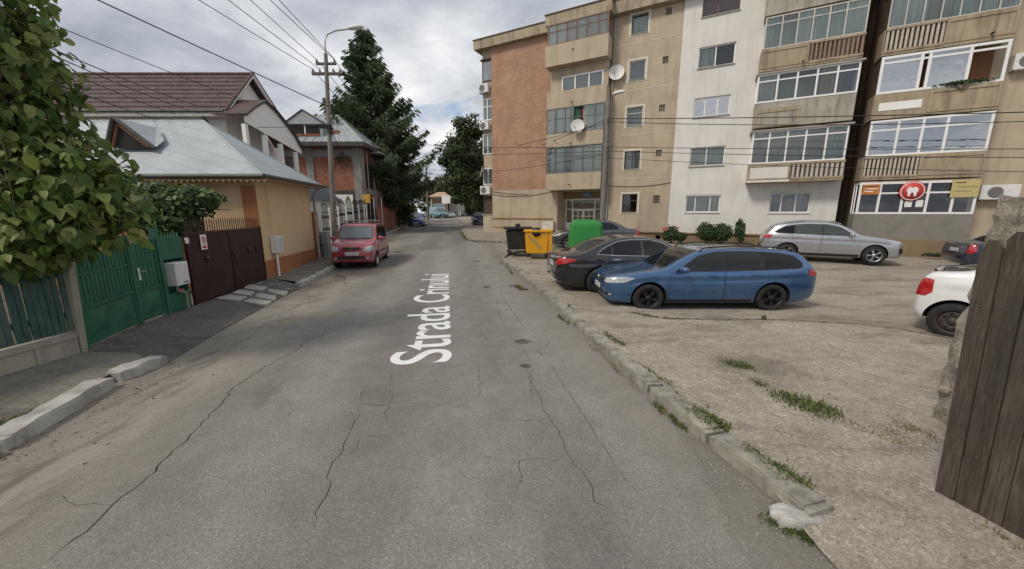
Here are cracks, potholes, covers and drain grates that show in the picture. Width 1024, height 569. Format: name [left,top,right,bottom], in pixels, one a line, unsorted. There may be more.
crack [410,275,620,519]
crack [50,322,393,560]
